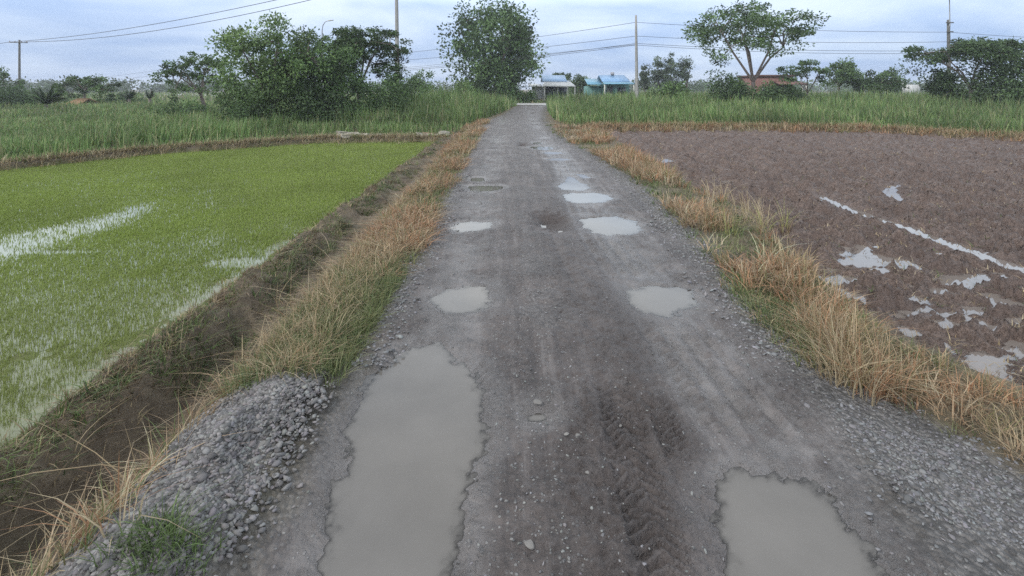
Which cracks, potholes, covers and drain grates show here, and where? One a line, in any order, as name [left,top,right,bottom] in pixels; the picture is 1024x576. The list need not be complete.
pothole [465,184,507,192]
pothole [426,281,496,315]
pothole [445,219,496,233]
pothole [575,214,650,237]
pothole [621,281,703,321]
pothole [554,175,594,191]
pothole [308,337,501,576]
pothole [561,190,617,204]
pothole [697,457,900,576]
